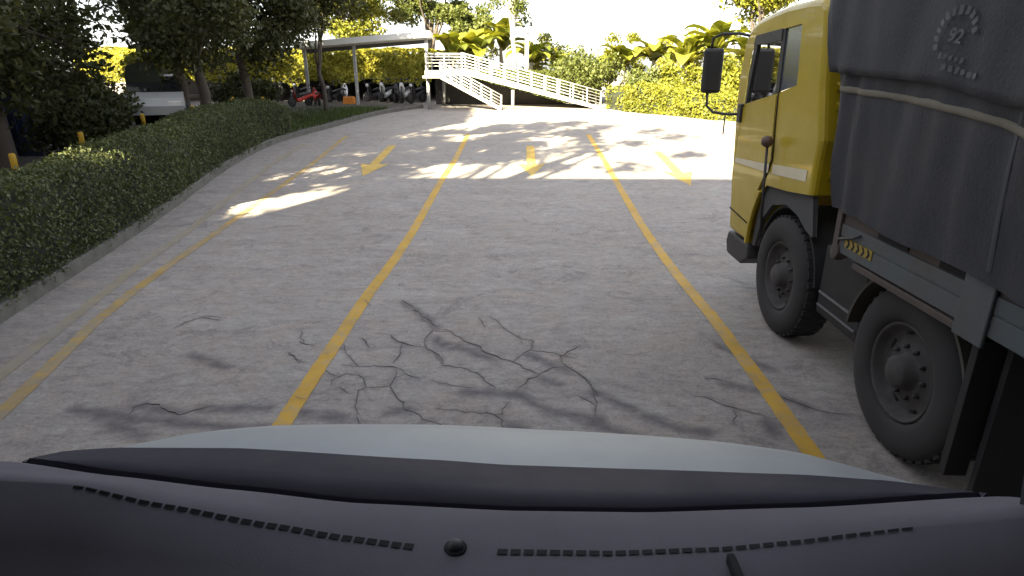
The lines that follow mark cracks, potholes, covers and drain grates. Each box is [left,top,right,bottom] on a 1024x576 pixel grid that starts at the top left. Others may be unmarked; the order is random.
crack [782,397,847,415]
crack [694,378,764,423]
crack [327,300,598,428]
crack [128,403,212,416]
